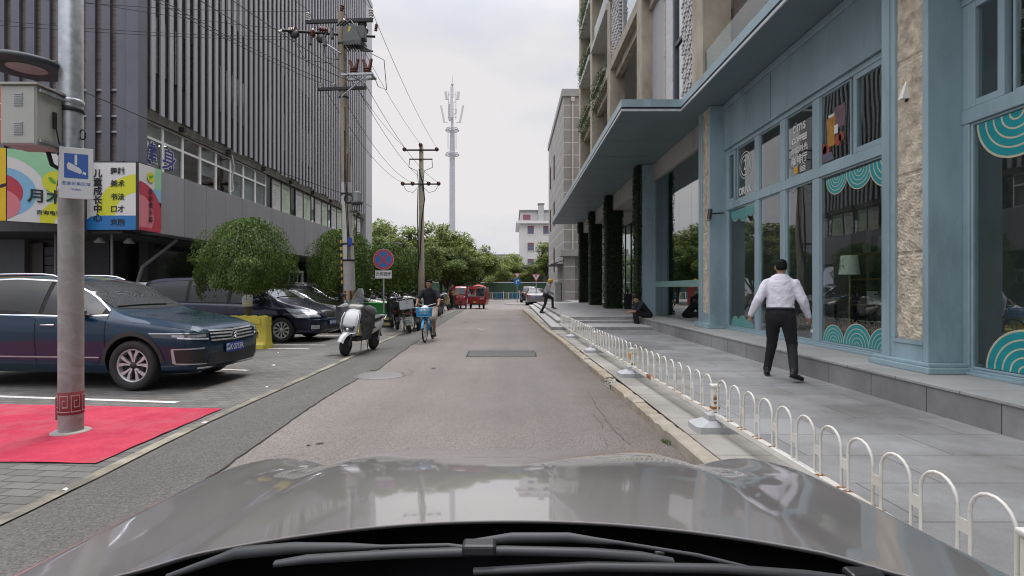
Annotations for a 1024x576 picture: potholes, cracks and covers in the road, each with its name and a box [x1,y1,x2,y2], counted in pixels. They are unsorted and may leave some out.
manhole cover [354,371,406,380]
